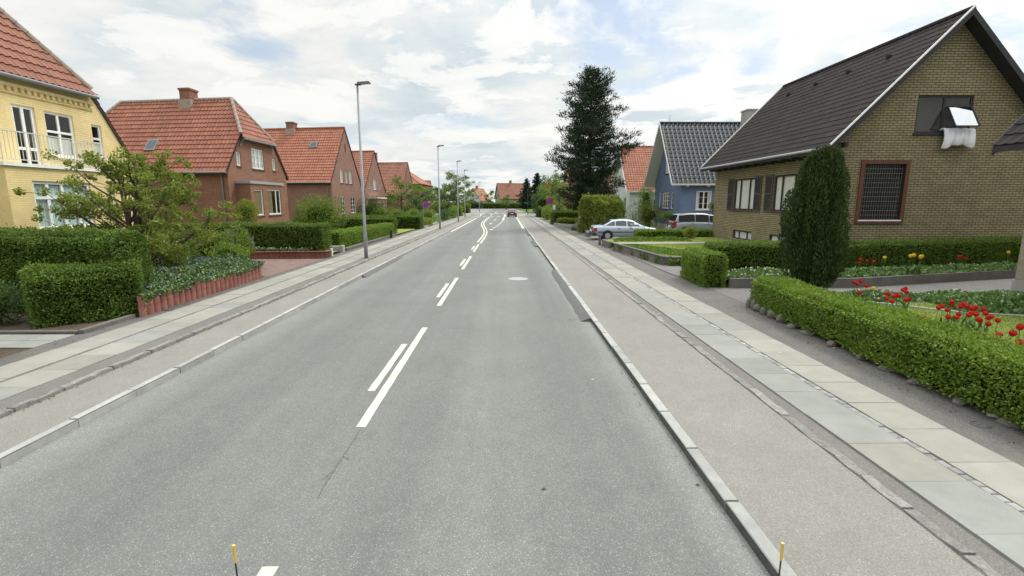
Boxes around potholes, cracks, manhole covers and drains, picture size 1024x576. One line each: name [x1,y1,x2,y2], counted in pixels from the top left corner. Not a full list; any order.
crack [316,430,360,500]
